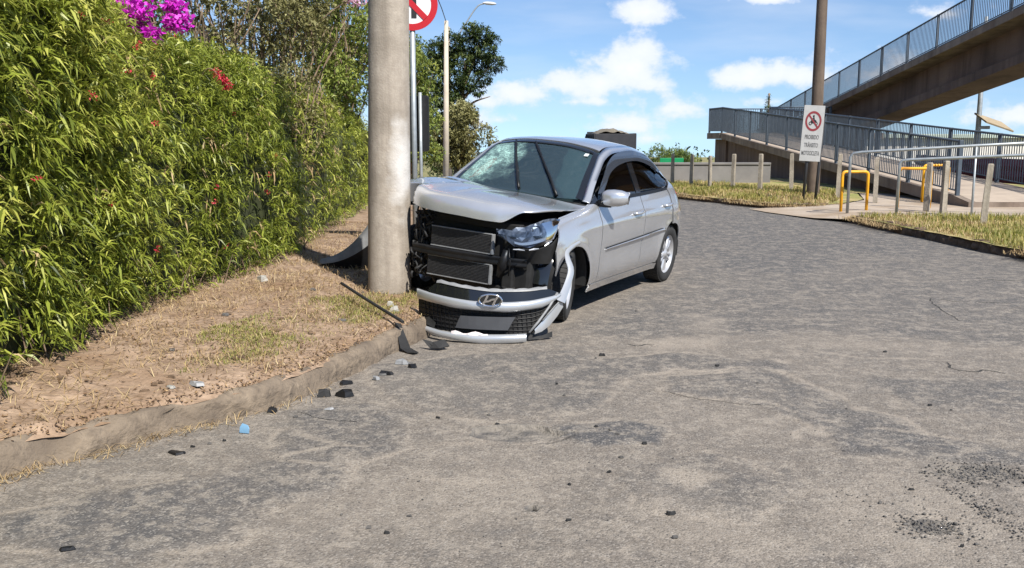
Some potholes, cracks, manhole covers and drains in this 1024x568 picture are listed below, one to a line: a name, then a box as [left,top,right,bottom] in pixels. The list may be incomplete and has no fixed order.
crack [648,391,779,406]
pothole [898,516,969,539]
pothole [929,463,1024,484]
crack [929,298,960,321]
crack [945,362,1005,374]
